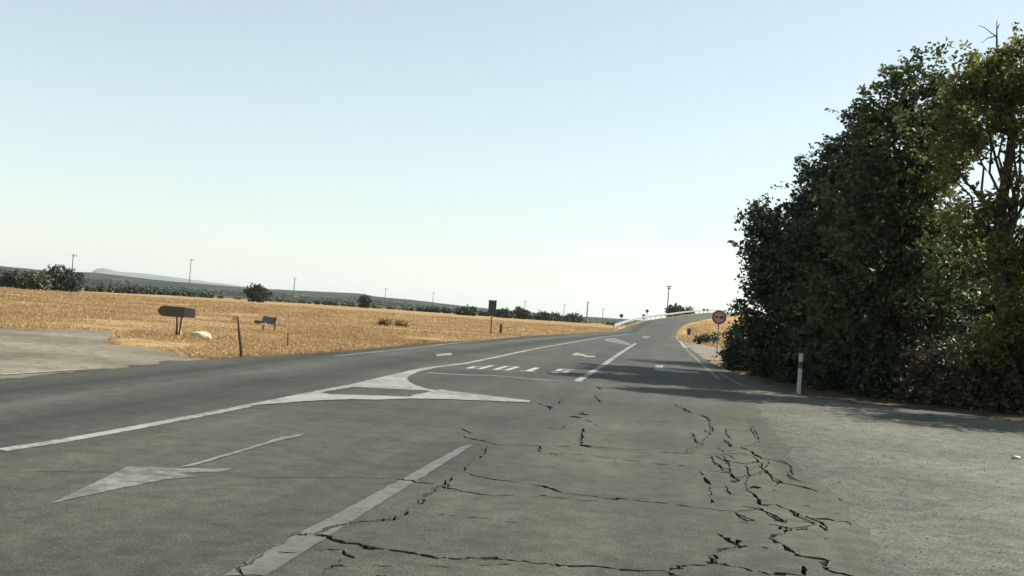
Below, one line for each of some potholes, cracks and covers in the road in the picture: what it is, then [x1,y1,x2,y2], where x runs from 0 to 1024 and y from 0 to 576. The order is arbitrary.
crack [235,386,853,576]
